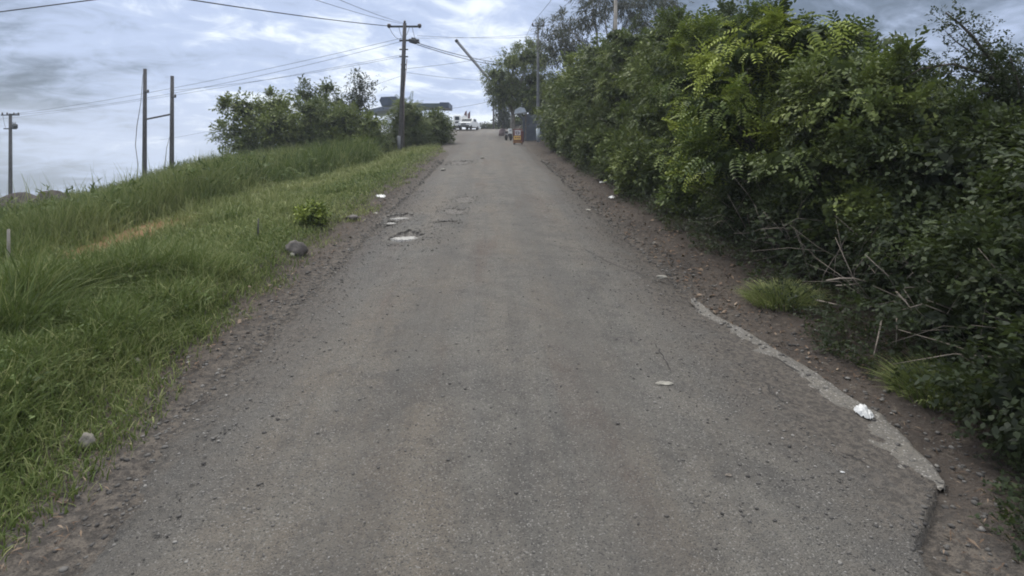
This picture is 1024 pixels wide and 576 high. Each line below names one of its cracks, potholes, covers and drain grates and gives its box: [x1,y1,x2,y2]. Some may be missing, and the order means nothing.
pothole [381,211,419,222]
pothole [438,207,470,215]
pothole [382,227,431,245]
